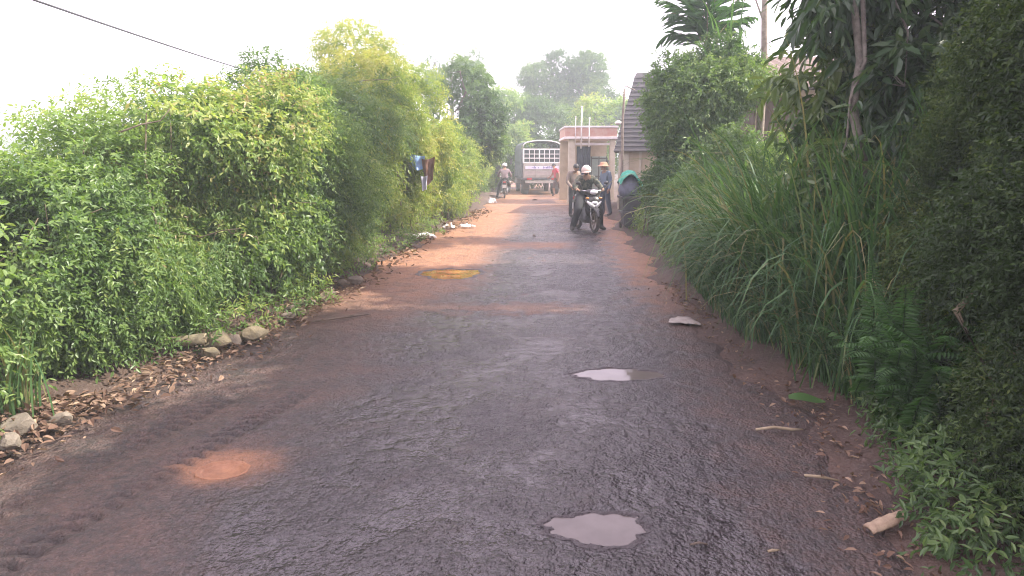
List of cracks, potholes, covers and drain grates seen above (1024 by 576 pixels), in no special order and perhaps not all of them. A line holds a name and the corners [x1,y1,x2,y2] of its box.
pothole [536,510,652,550]
pothole [564,366,672,382]
